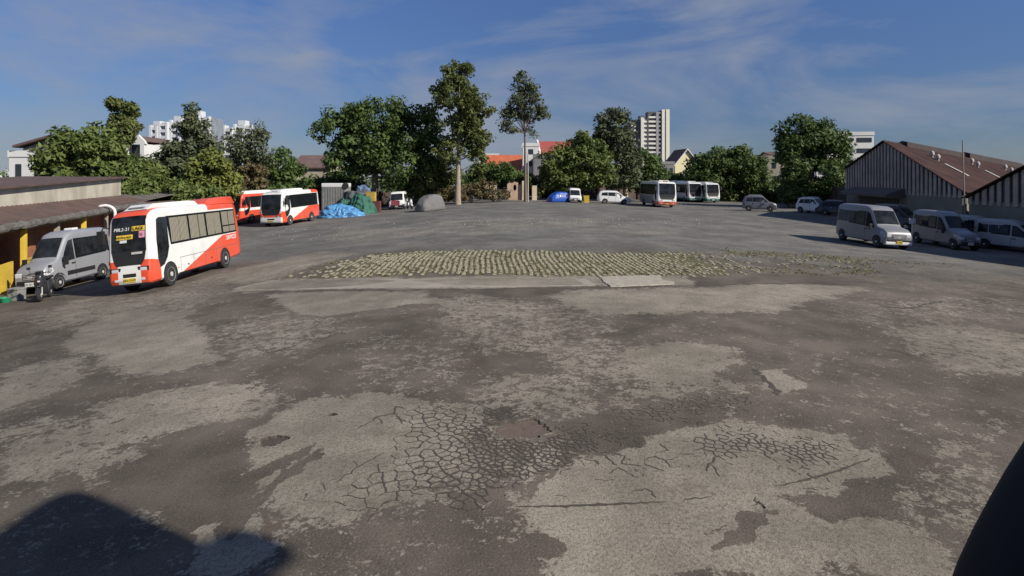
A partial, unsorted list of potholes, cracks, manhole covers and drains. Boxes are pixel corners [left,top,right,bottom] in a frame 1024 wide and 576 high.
crack [304,369,873,520]
pothole [491,417,554,440]
pothole [255,434,293,449]
